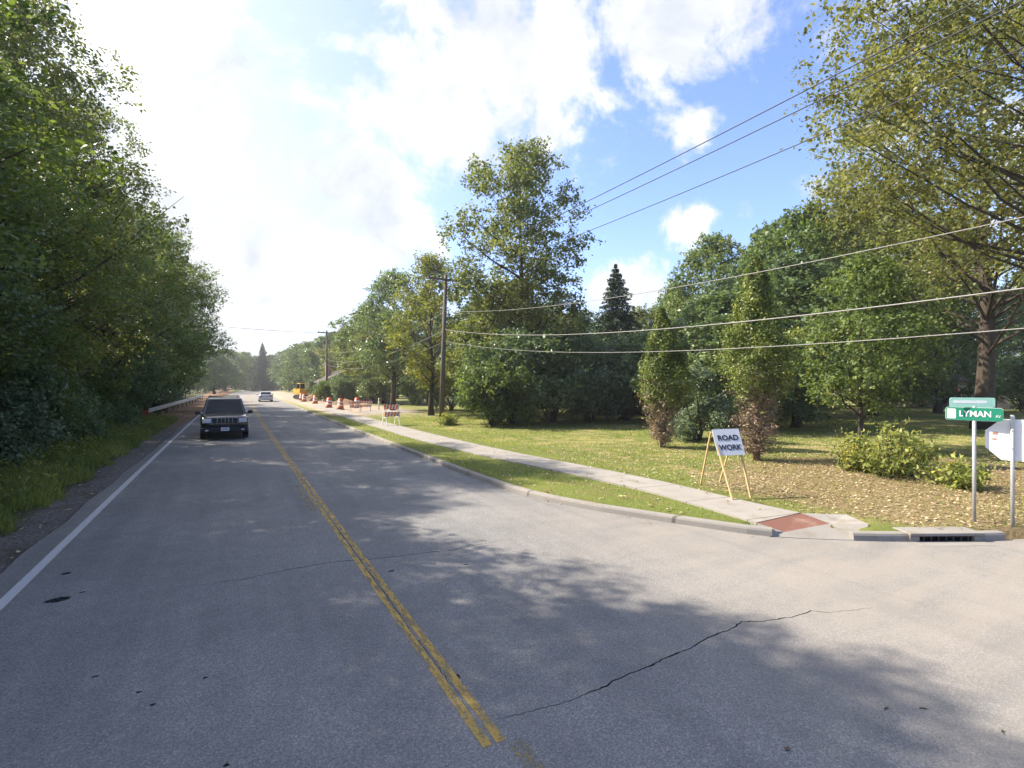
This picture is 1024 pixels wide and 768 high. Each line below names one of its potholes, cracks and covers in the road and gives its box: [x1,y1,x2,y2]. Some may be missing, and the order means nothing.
crack [477,608,869,720]
drain grate [893,527,996,546]
